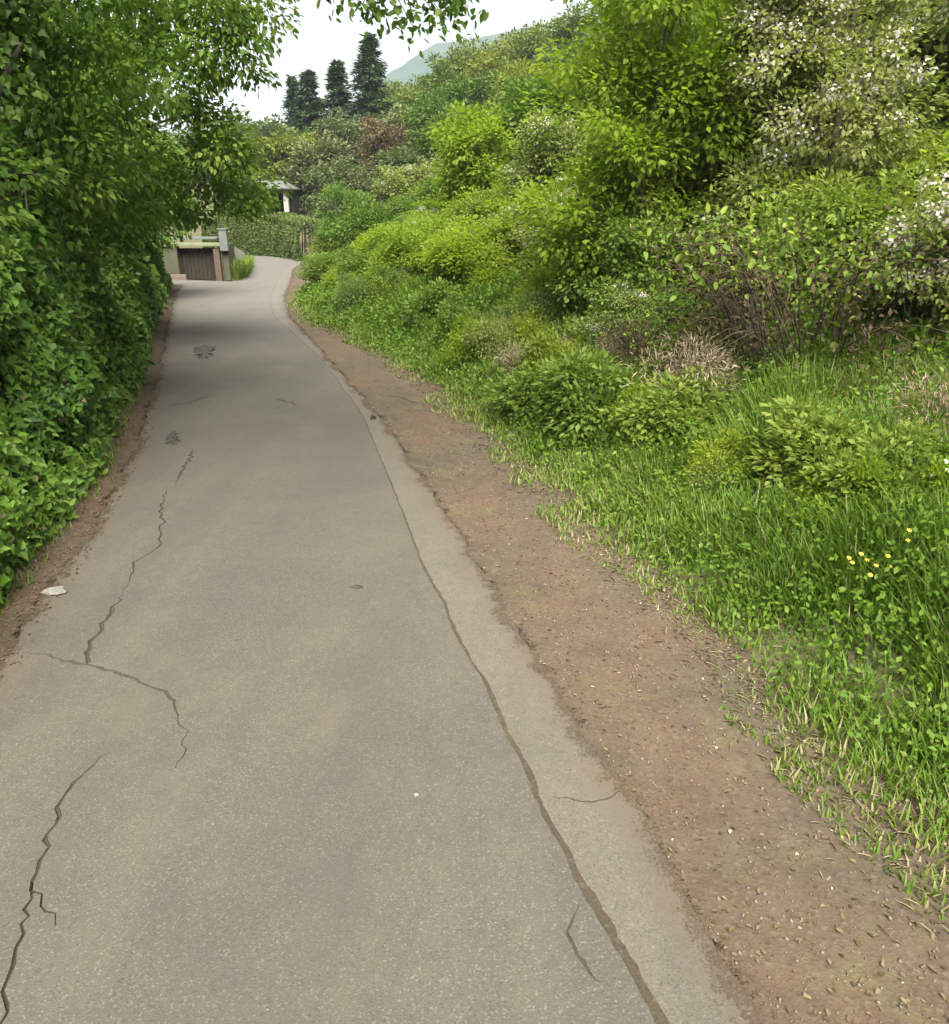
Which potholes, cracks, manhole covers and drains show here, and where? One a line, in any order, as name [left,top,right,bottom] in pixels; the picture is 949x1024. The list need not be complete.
crack [0,753,109,1024]
pothole [165,431,181,445]
crack [554,791,619,803]
crack [564,906,601,982]
crack [29,448,194,768]
